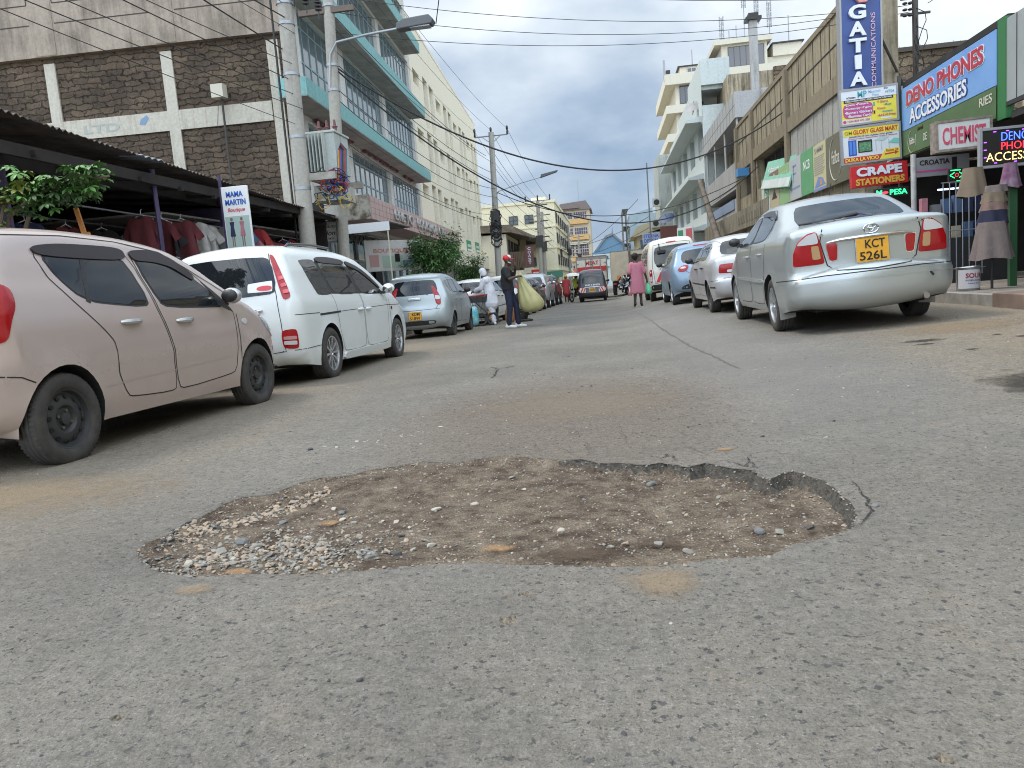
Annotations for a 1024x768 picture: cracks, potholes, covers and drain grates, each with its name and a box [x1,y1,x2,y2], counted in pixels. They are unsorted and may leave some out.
crack [852,481,875,524]
pothole [136,454,858,577]
